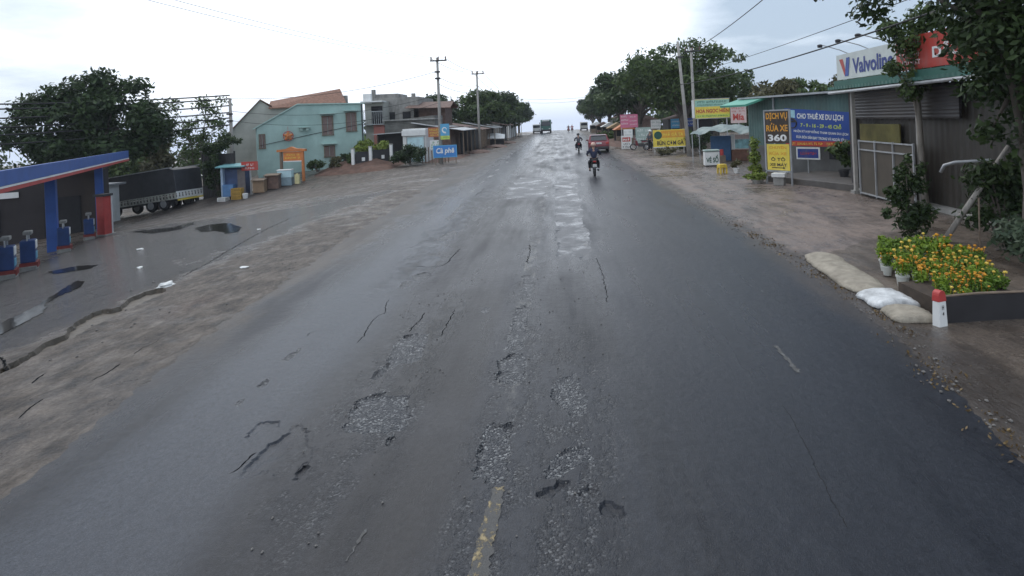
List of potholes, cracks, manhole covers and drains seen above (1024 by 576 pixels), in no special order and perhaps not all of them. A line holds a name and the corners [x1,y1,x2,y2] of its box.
pothole [596,500,627,520]
pothole [471,422,514,485]
pothole [550,373,588,420]
pothole [493,352,528,386]
pothole [370,333,429,382]
pothole [542,445,594,480]
pothole [341,391,414,435]
pothole [535,479,570,503]
